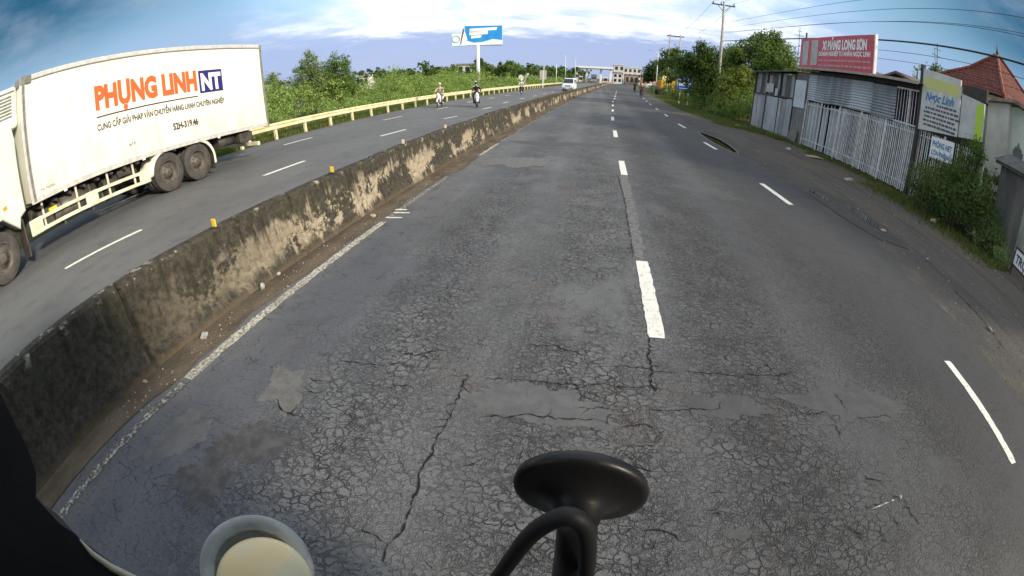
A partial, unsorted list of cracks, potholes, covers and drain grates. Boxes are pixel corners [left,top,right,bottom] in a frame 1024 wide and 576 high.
crack [485,338,795,472]
crack [618,177,635,255]
crack [849,467,919,545]
crack [362,375,470,563]
crack [642,529,690,573]
pothole [698,131,739,154]
crack [789,395,891,442]
crack [345,350,438,388]
crack [276,378,325,419]
